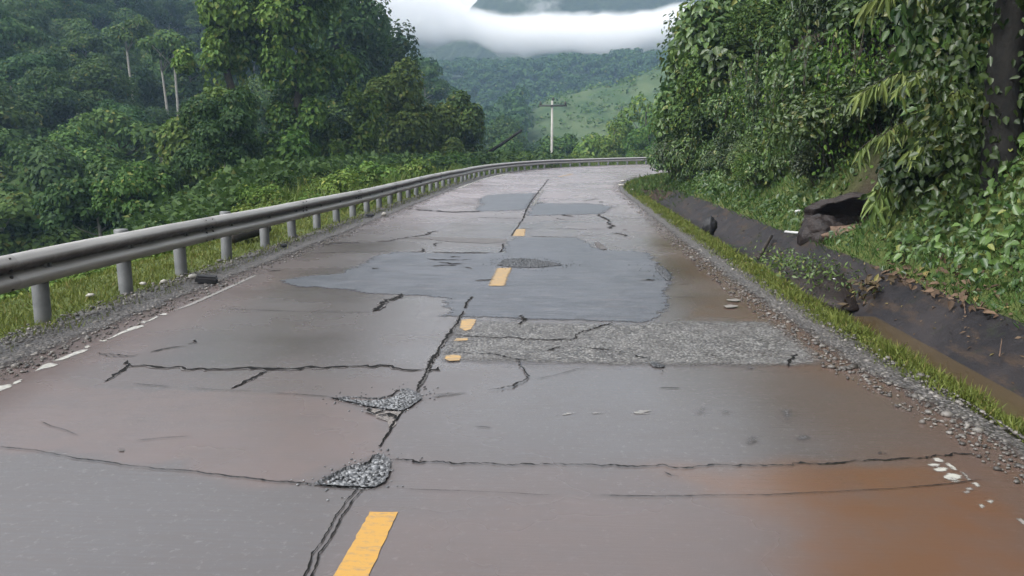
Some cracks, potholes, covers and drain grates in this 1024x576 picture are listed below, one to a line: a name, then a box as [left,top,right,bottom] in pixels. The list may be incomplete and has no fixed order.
pothole [291,449,423,501]
crack [372,293,404,311]
crack [0,446,318,484]
crack [390,452,977,468]
pothole [326,382,439,412]
crack [99,315,612,397]
pothole [486,257,575,271]
